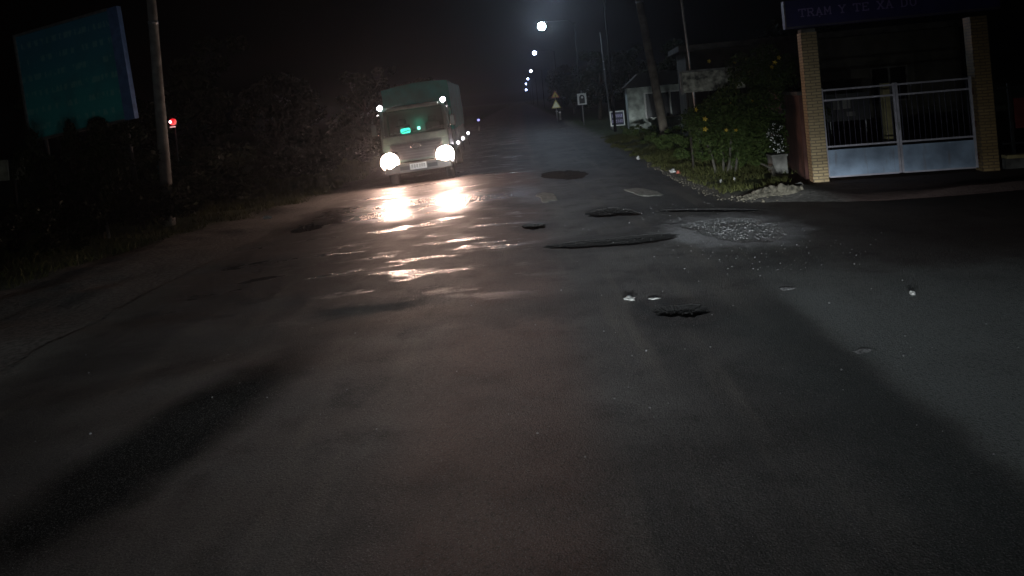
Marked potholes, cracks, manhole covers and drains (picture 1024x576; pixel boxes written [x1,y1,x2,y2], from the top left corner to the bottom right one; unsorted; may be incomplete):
pothole [627,298,736,325]
pothole [533,169,597,181]
pothole [508,221,560,233]
pothole [277,222,335,236]
pothole [572,205,654,220]
pothole [527,231,696,252]
